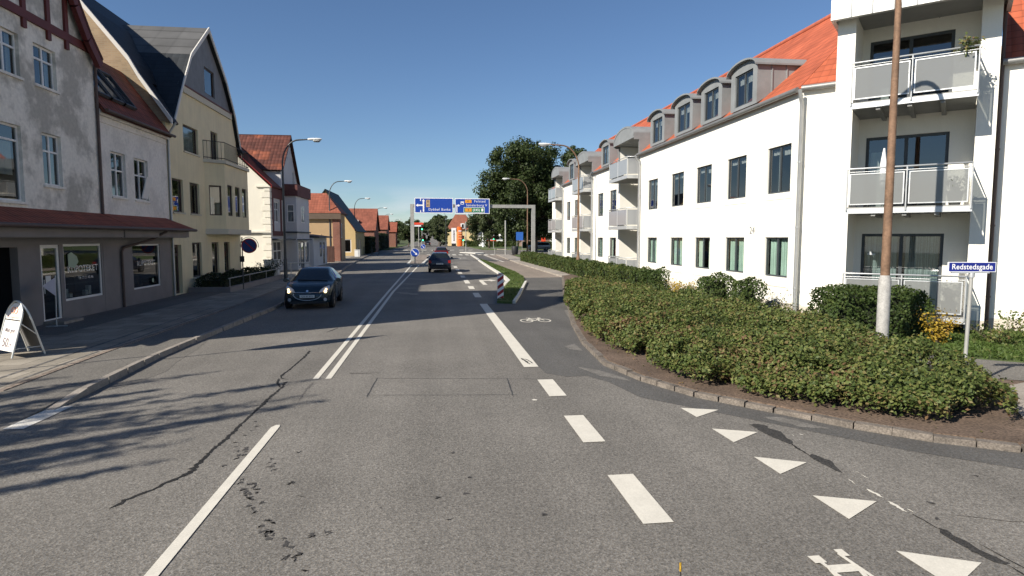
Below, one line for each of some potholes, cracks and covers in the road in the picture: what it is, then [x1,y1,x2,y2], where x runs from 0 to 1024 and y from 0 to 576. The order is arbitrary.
crack [982,545,1024,575]
crack [110,351,313,508]
